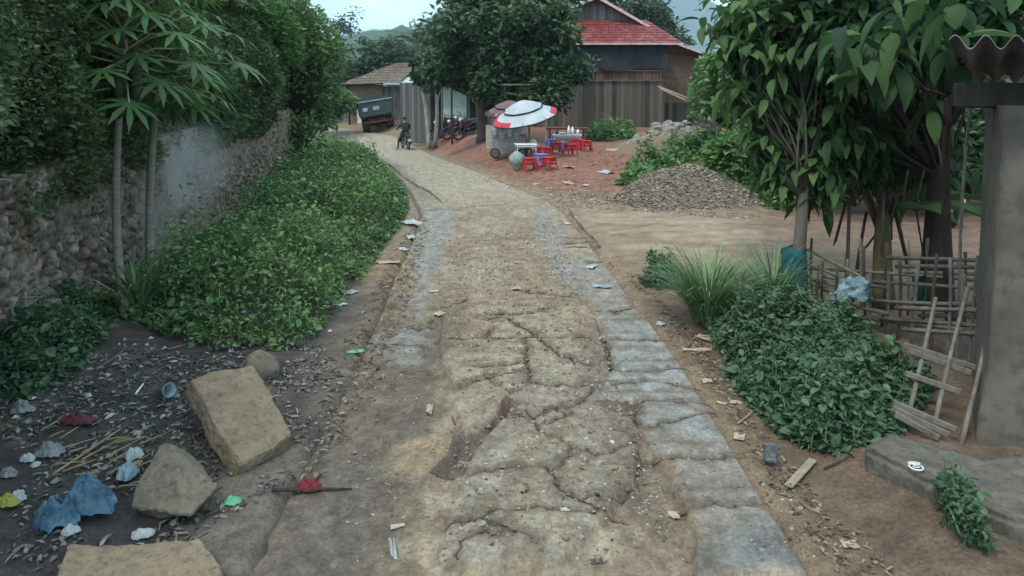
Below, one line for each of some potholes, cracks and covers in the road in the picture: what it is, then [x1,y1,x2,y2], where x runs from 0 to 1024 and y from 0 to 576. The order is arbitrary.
pothole [498,396,523,420]
crack [380,291,719,560]
pothole [429,417,503,480]
